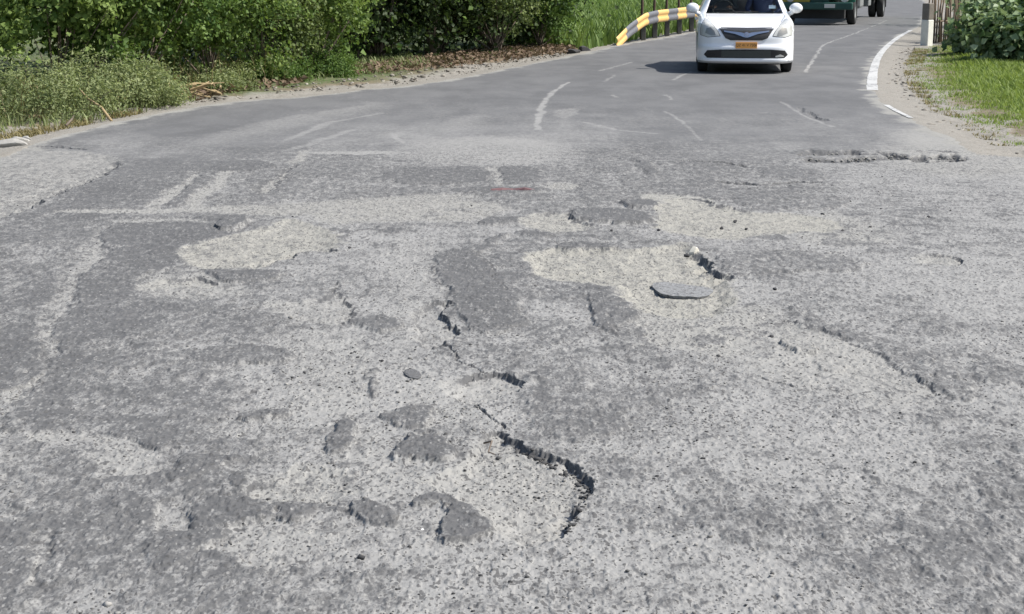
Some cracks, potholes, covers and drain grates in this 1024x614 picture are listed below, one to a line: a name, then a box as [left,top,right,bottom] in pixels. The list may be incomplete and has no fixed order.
crack [477,404,507,429]
crack [448,347,483,373]
